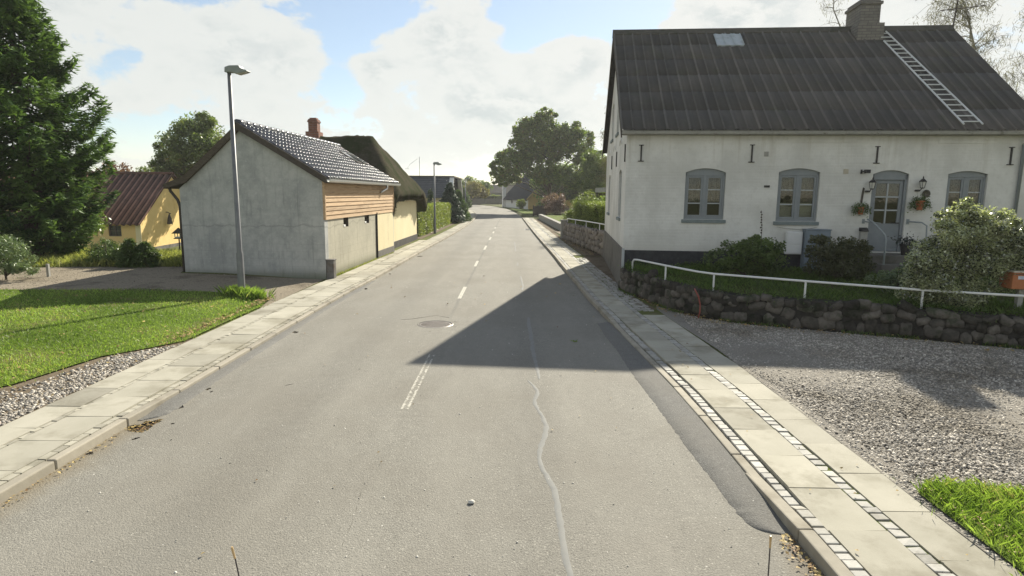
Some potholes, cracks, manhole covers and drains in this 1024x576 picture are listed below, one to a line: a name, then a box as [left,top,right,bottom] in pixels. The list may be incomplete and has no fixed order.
manhole cover [417,320,453,328]
